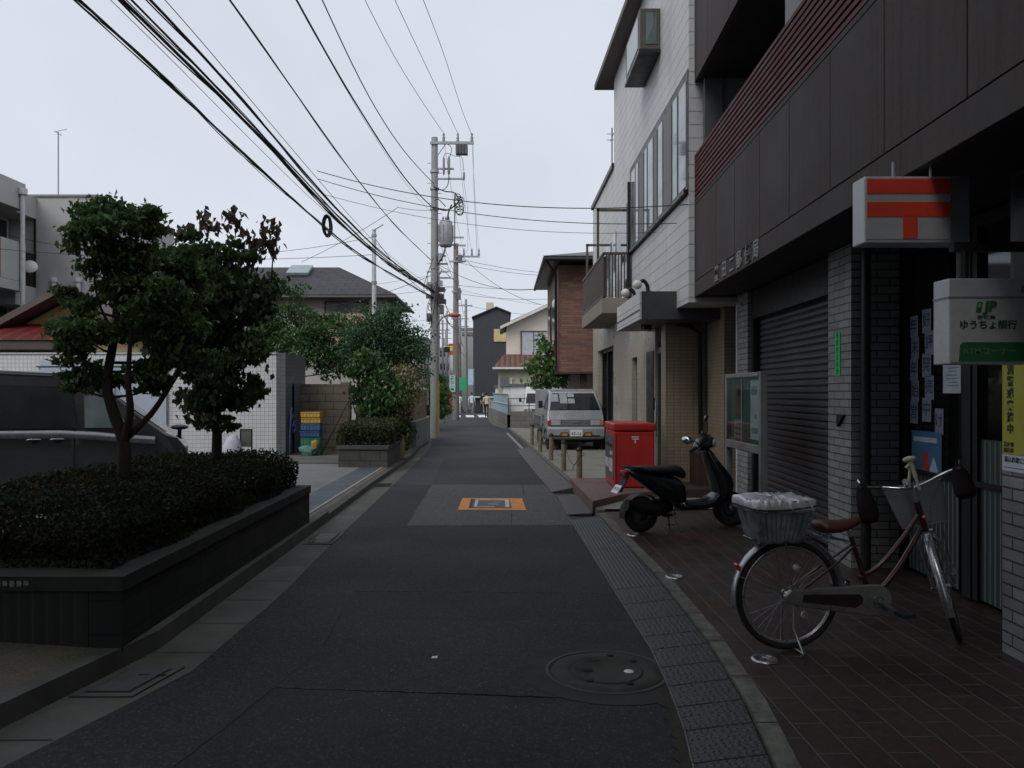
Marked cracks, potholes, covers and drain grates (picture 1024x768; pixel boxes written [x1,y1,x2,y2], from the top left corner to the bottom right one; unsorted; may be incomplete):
manhole cover [521,643,666,706]
